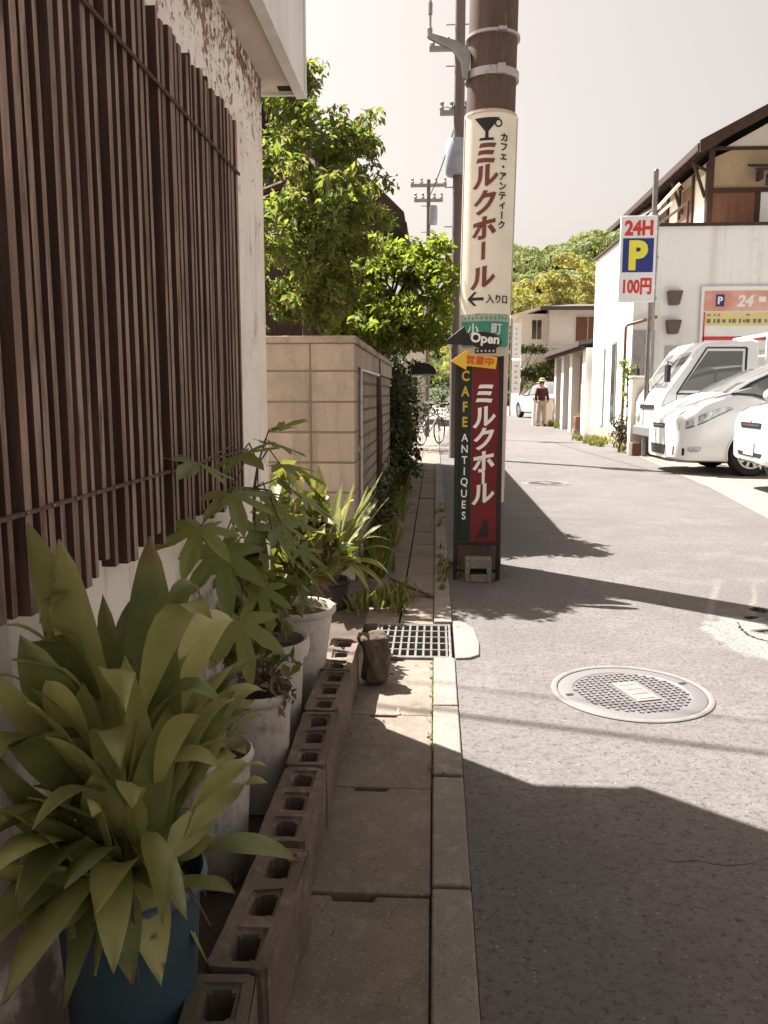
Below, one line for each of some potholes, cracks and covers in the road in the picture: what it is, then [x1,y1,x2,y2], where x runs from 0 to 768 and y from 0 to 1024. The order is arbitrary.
manhole cover [551,666,716,724]
crack [737,622,768,641]
drain grate [377,623,452,668]
